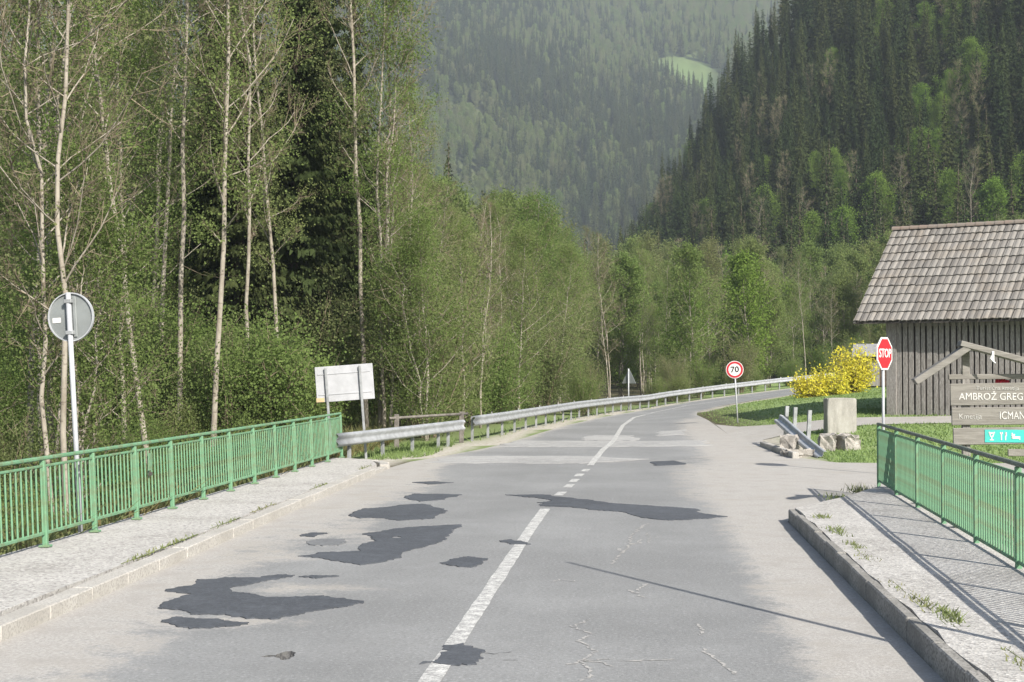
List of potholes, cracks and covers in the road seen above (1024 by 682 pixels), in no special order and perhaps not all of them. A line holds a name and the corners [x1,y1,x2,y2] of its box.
crack [696,623,737,675]
crack [568,619,671,681]
crack [610,523,656,564]
